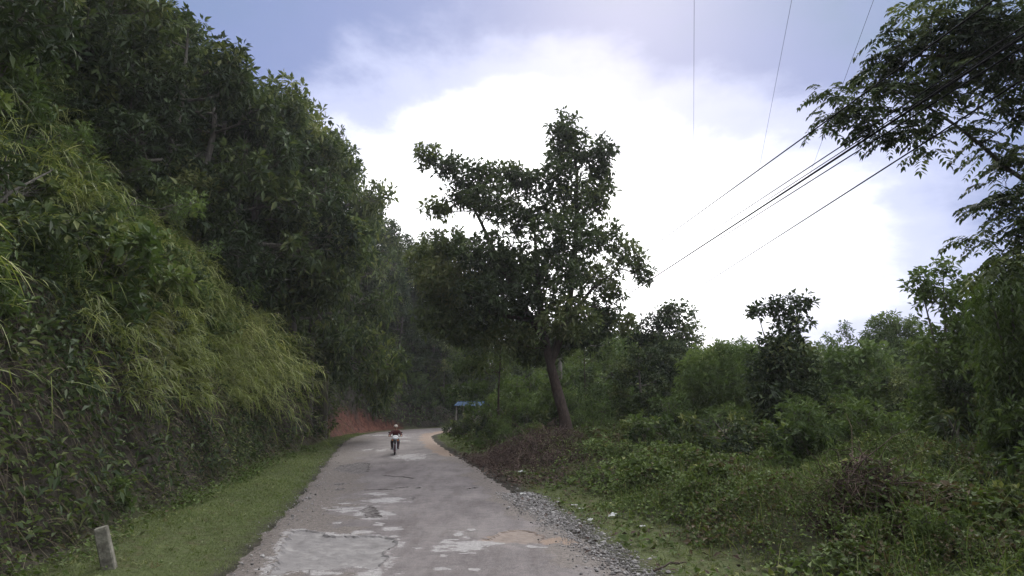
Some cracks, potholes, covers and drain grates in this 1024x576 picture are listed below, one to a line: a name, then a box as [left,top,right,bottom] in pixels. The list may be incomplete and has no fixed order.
pothole [360,505,383,518]
